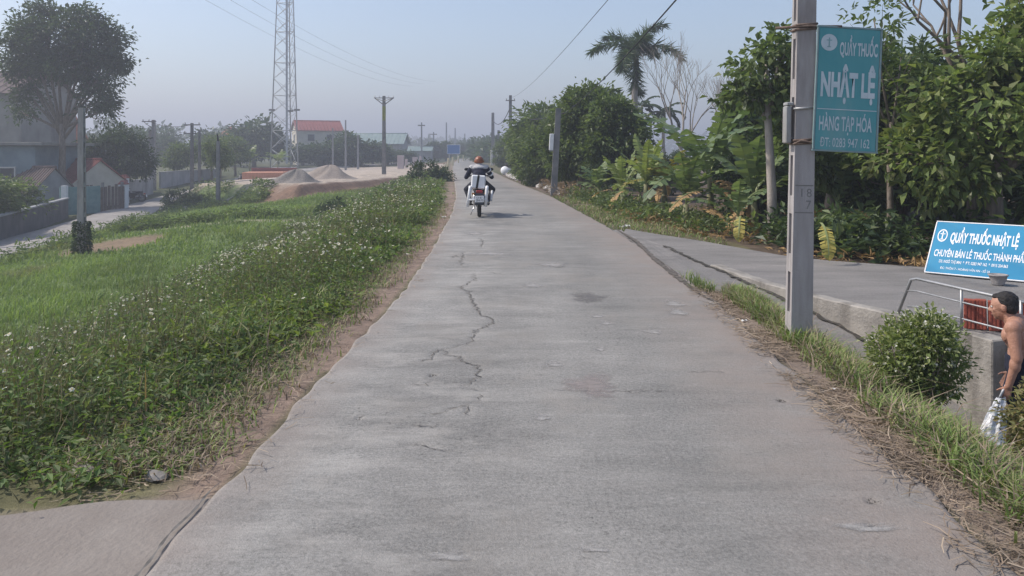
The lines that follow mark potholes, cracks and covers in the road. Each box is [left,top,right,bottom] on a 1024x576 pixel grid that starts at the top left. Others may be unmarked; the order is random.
crack [407,252,500,427]
